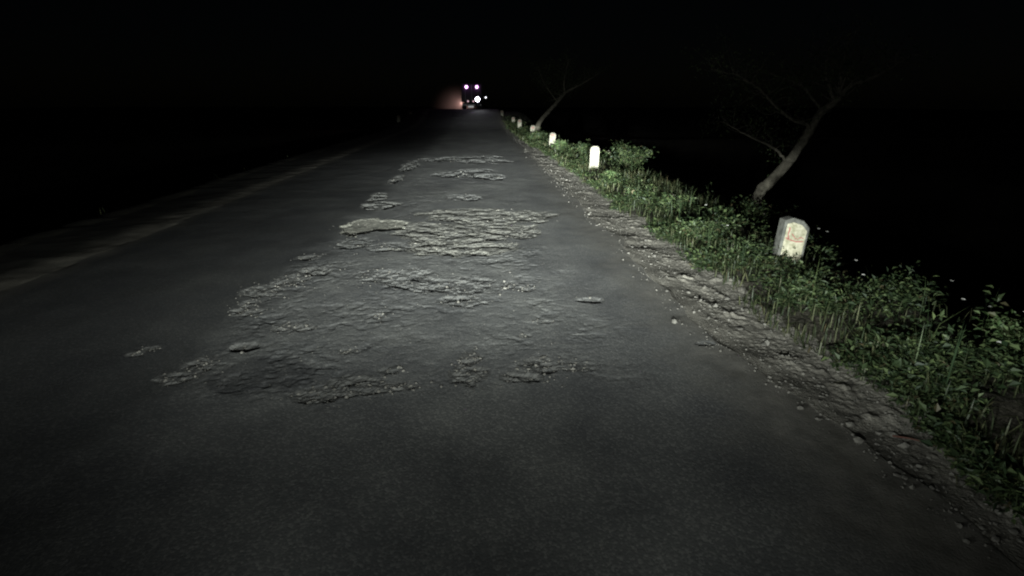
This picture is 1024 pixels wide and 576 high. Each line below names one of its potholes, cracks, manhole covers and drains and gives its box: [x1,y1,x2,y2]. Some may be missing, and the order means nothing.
pothole [150,354,221,387]
pothole [446,350,491,390]
pothole [293,323,319,332]
pothole [123,346,163,358]
pothole [416,156,515,165]
pothole [226,342,262,352]
pothole [360,192,405,211]
pothole [399,160,421,172]
pothole [237,273,312,298]
